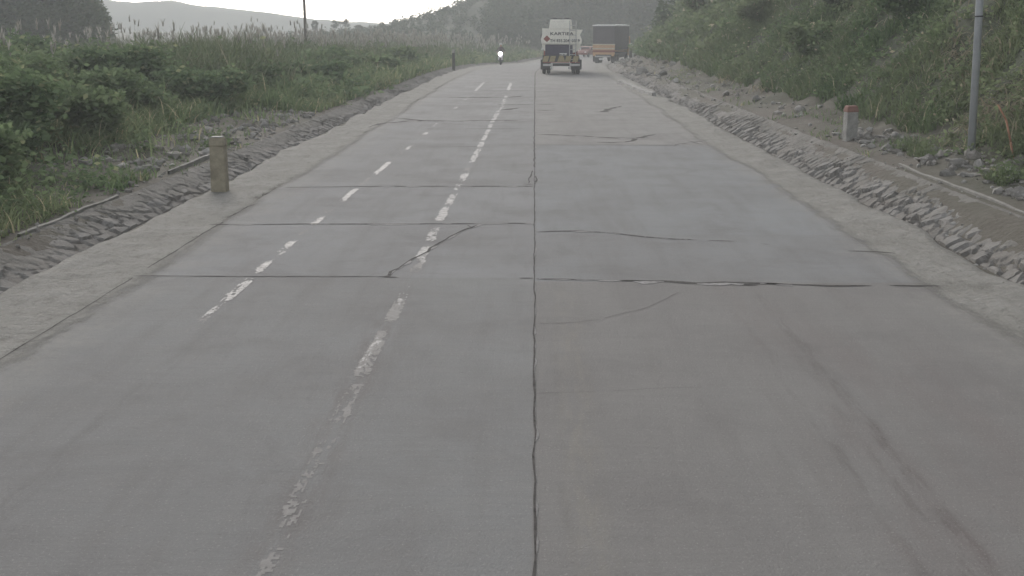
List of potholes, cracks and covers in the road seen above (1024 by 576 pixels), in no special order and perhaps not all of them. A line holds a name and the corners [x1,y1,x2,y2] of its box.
crack [378,224,481,277]
crack [370,101,706,145]
crack [543,278,935,323]
